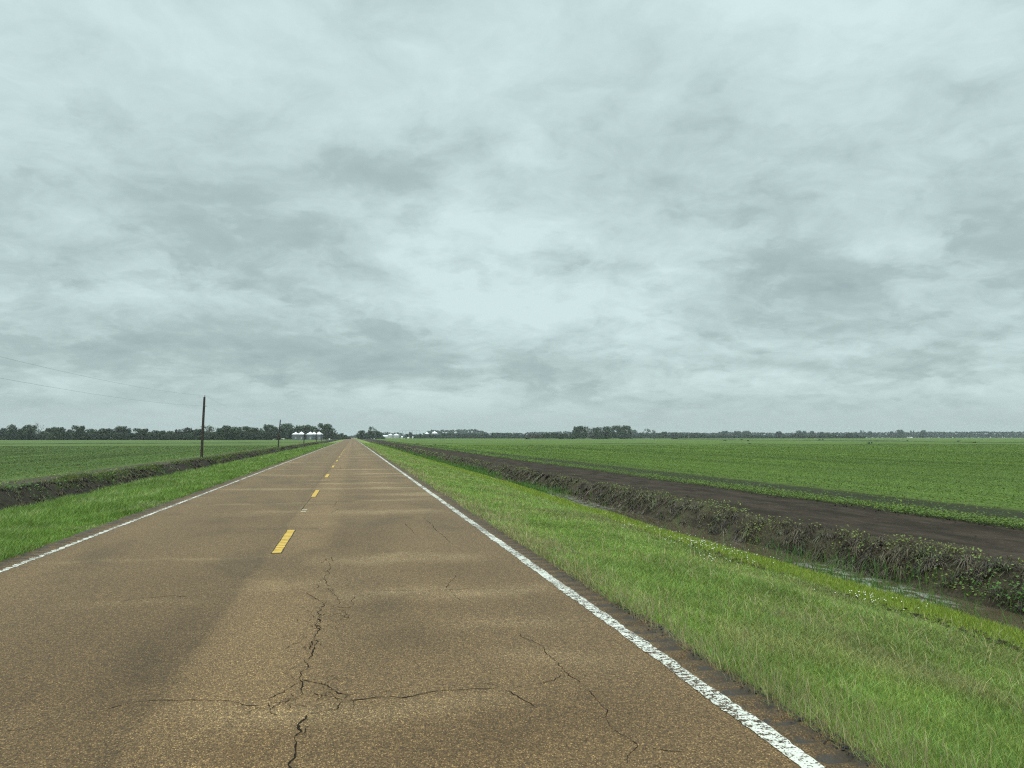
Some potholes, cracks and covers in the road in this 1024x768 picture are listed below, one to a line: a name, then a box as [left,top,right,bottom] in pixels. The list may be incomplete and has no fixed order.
crack [520,634,670,768]
crack [248,563,560,768]
